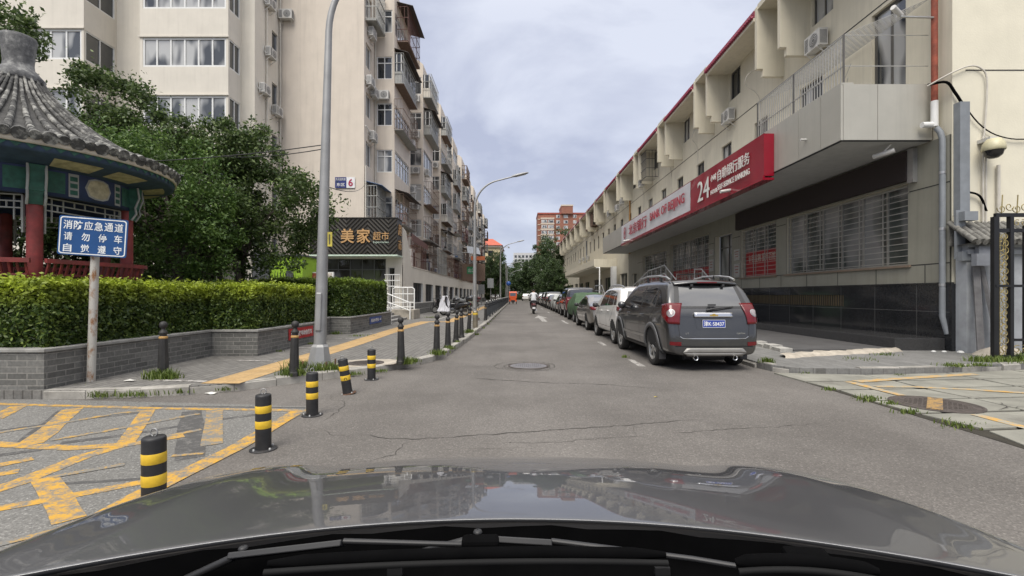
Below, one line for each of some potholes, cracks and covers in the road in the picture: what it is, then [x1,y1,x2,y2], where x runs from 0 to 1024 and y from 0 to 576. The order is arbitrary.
manhole cover [887,395,988,414]
crack [361,419,807,462]
